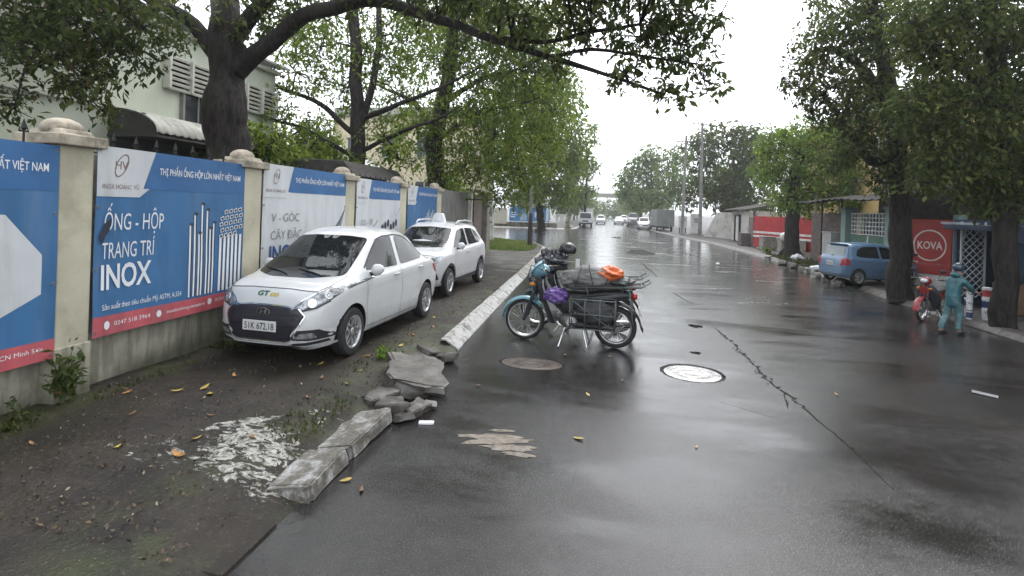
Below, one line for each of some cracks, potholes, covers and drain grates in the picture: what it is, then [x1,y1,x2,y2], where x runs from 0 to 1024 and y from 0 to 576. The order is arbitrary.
manhole cover [660,364,726,383]
crack [714,327,888,485]
manhole cover [499,357,565,370]
